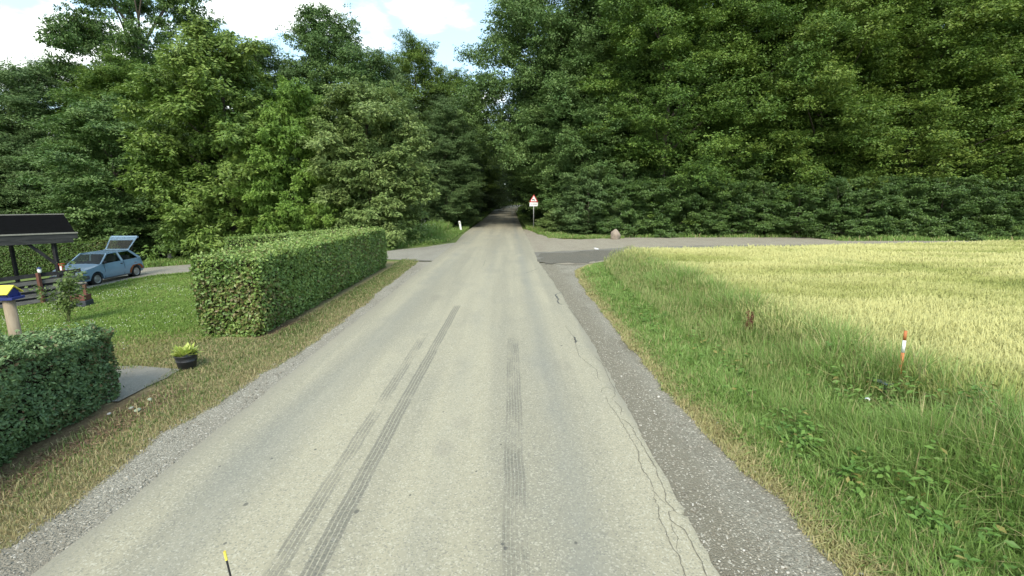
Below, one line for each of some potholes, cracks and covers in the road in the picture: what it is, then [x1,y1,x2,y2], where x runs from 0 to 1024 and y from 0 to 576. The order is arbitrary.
crack [565,325,707,576]
